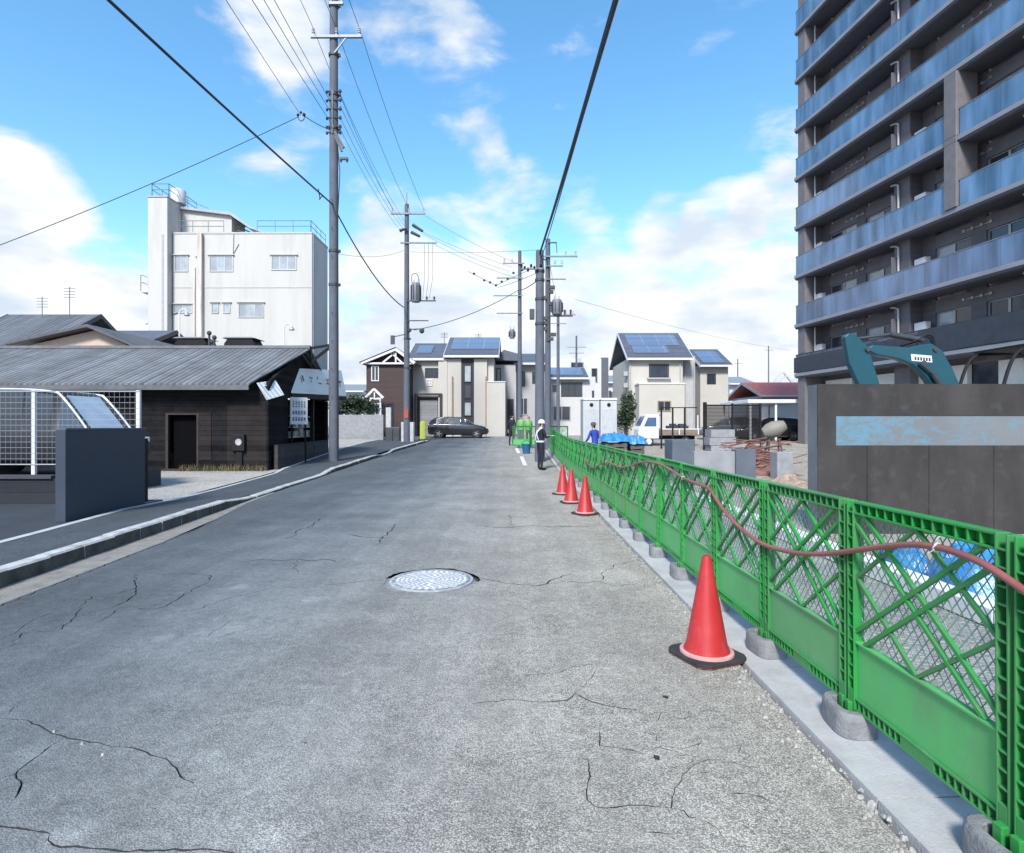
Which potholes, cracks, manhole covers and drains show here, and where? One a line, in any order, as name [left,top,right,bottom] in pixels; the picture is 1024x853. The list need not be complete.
crack [0,807,233,853]
crack [2,707,199,799]
crack [1,517,269,649]
crack [473,664,637,710]
crack [586,709,772,835]
manhole cover [384,569,480,593]
crack [479,562,634,586]
